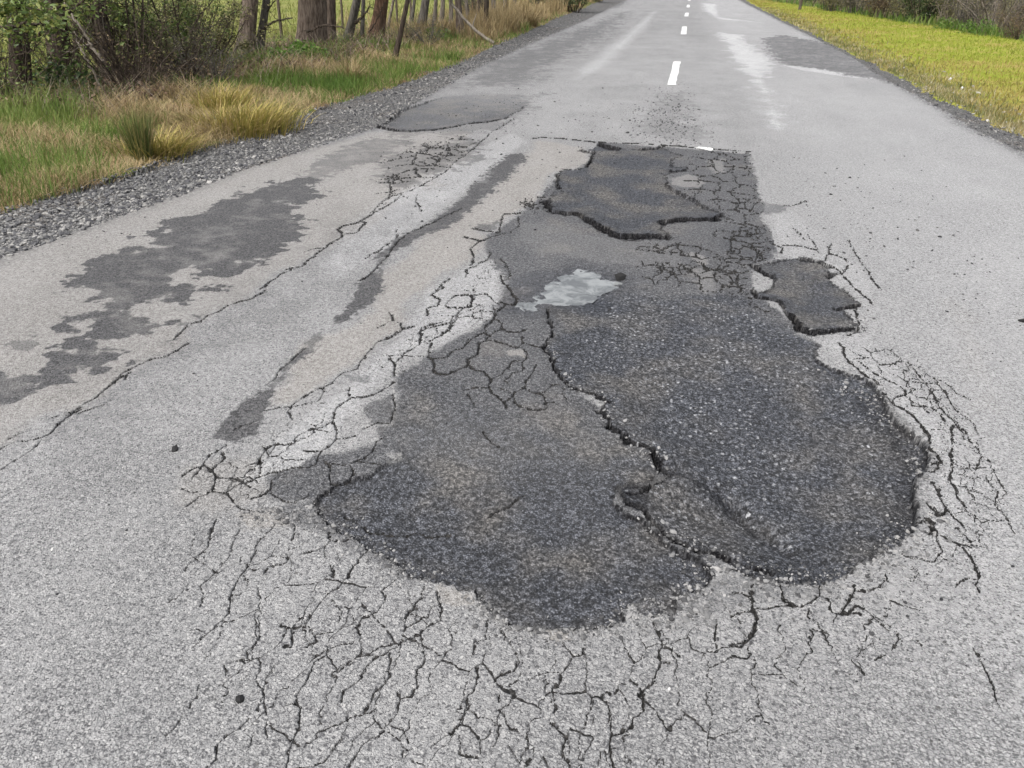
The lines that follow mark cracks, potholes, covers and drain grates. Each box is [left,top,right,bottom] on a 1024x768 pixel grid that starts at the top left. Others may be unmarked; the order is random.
crack [770,200,882,336]
crack [181,212,521,512]
crack [713,227,776,316]
crack [804,325,1011,578]
crack [636,242,766,301]
crack [343,517,452,540]
crack [169,519,217,603]
crack [901,506,981,593]
crack [973,648,1000,707]
crack [183,529,928,768]
crack [488,495,526,519]
